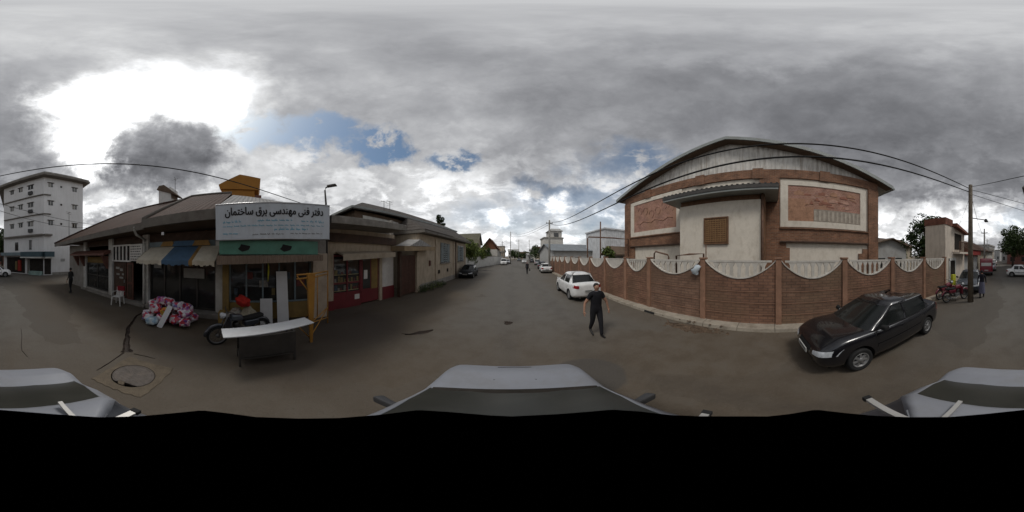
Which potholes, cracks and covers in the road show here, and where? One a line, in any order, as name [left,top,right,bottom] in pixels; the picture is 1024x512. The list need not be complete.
crack [98,313,155,370]
manhole cover [91,356,173,397]
